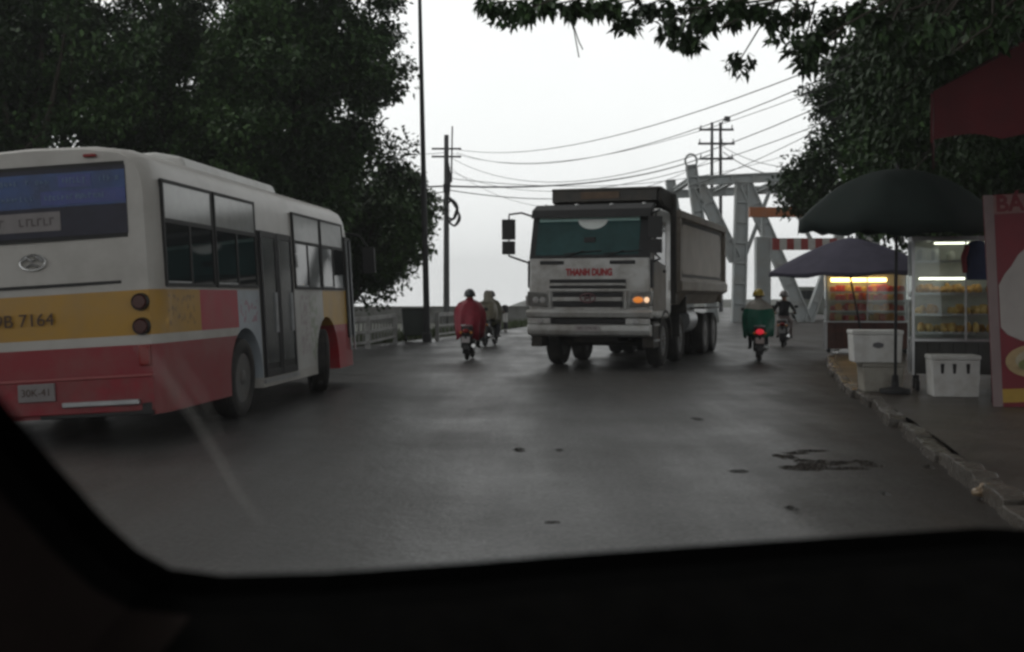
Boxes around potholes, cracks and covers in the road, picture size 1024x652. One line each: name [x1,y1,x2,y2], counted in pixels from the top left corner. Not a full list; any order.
pothole [771,449,871,472]
